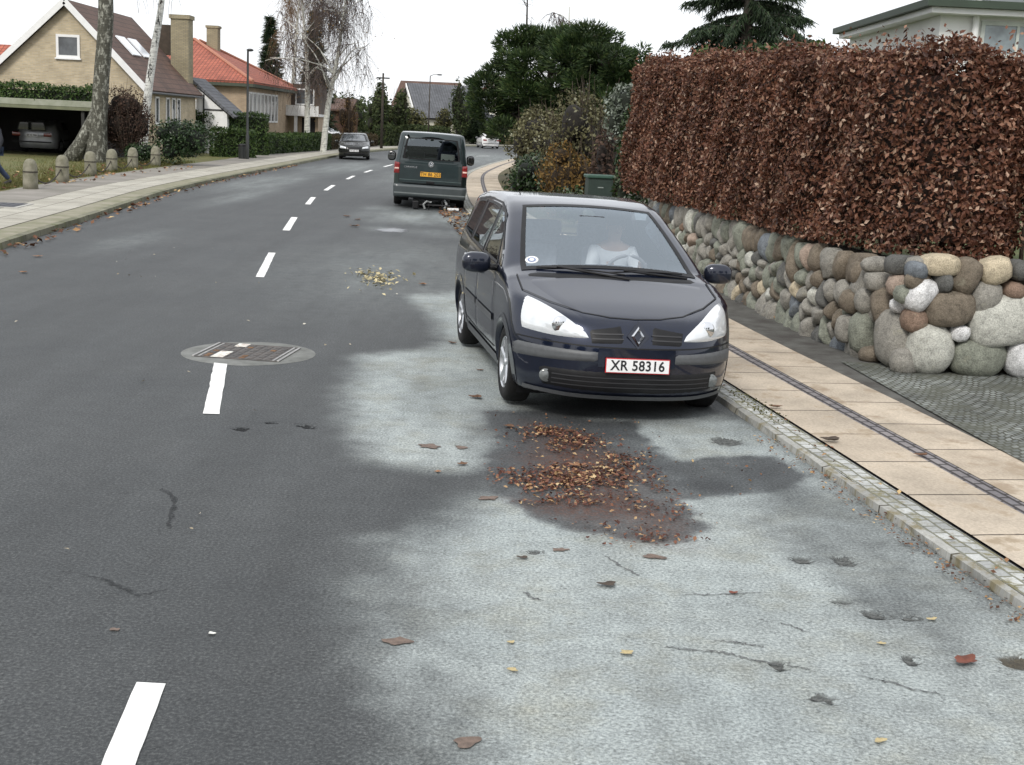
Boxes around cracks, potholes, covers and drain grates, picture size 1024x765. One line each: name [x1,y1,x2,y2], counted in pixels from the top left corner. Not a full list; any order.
crack [864,676,941,695]
pothole [831,557,857,567]
pothole [809,694,836,705]
pothole [860,612,892,620]
crack [666,640,810,670]
pothole [711,437,742,446]
manhole cover [181,342,316,366]
